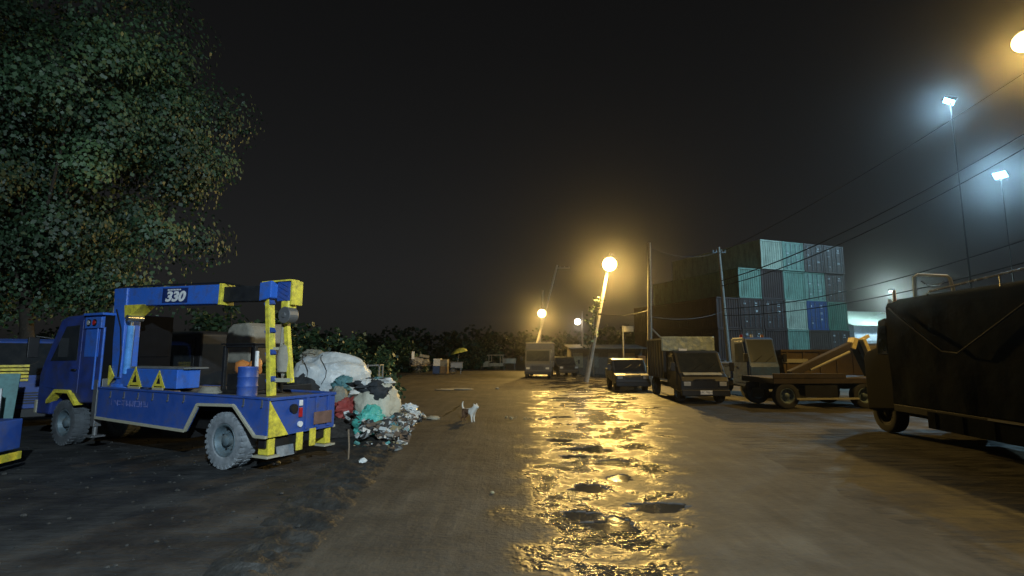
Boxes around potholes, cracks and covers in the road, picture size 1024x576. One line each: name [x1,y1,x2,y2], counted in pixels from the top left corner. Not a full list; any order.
pothole [559,510,607,522]
pothole [621,502,691,514]
pothole [567,483,616,493]
pothole [604,473,634,483]
